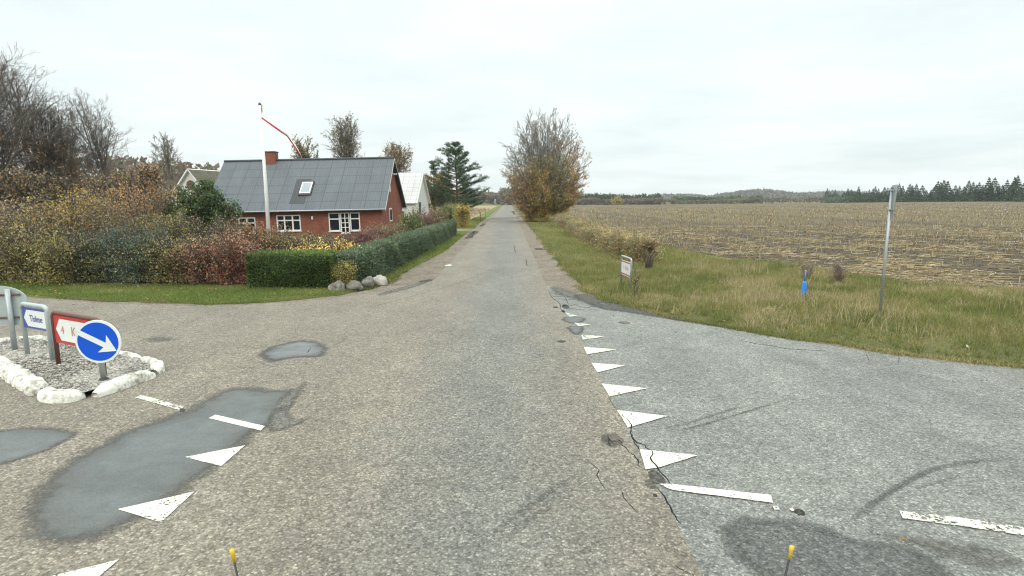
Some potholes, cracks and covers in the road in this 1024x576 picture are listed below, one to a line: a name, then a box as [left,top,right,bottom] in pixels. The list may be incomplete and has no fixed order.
crack [592,415,679,522]
pothole [648,470,666,484]
pothole [601,433,624,448]
